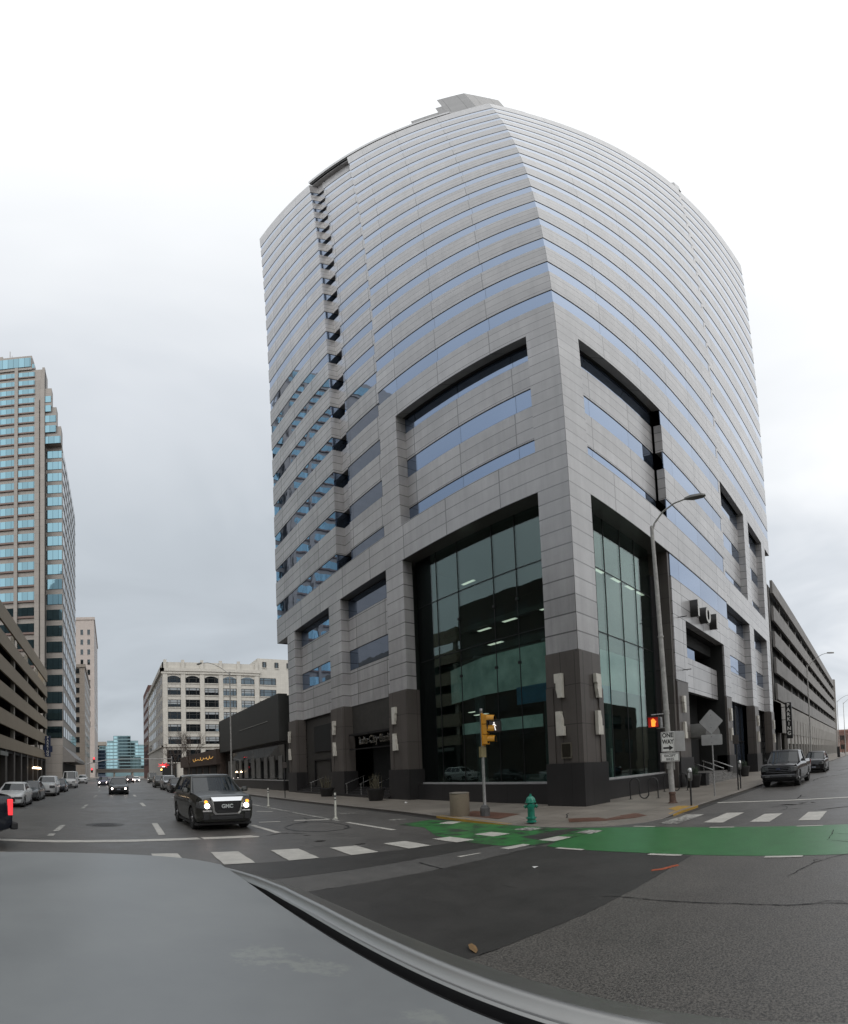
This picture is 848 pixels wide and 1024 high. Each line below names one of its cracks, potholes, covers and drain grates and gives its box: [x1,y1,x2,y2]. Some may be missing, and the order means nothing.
crack [619,896,848,905]
